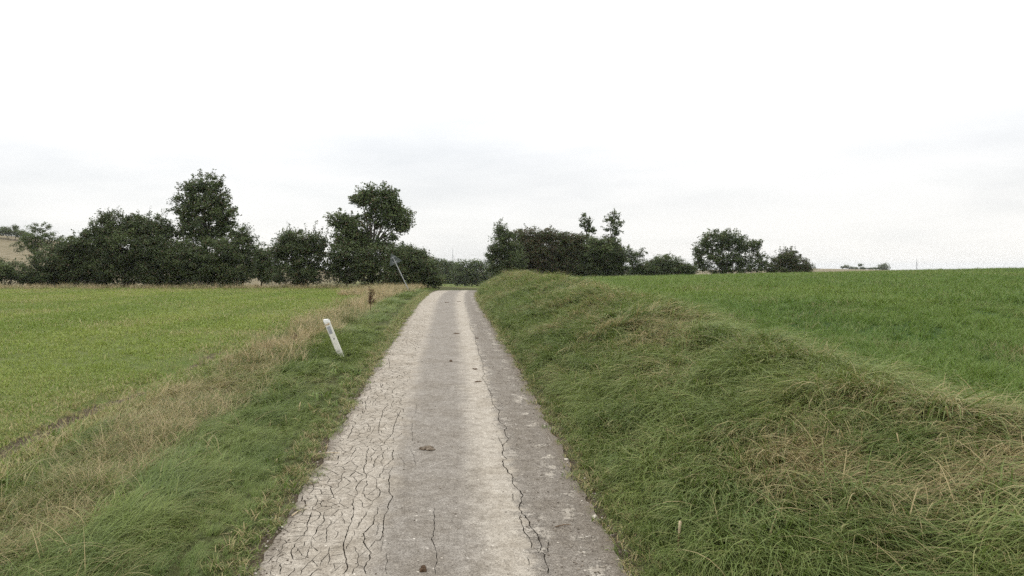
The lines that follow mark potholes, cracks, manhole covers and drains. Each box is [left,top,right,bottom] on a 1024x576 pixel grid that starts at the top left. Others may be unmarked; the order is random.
crack [470,327,549,573]
crack [265,317,421,576]
